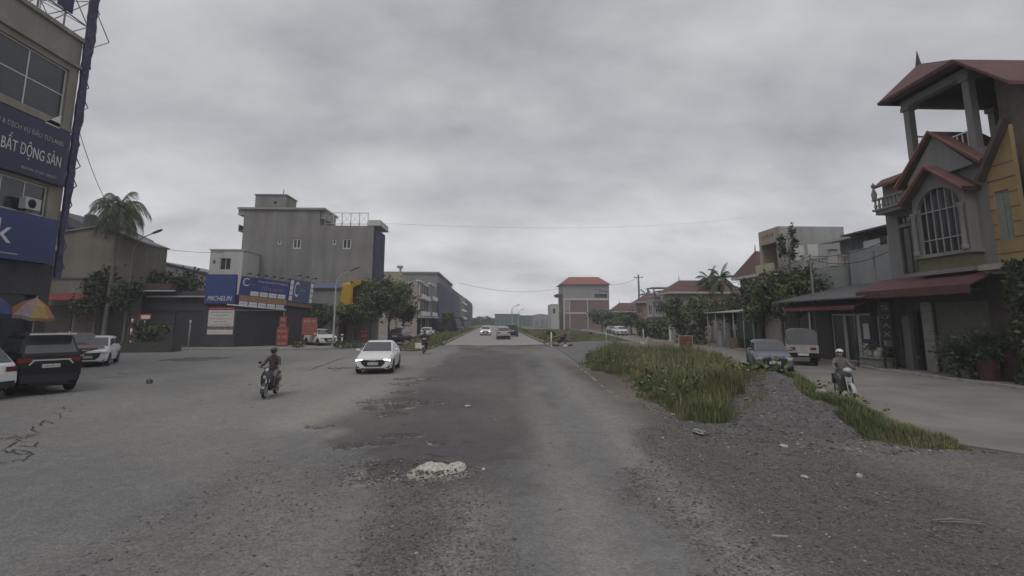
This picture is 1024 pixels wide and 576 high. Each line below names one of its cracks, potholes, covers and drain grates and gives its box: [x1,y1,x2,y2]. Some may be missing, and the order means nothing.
pothole [365,458,472,480]
crack [0,407,65,463]
